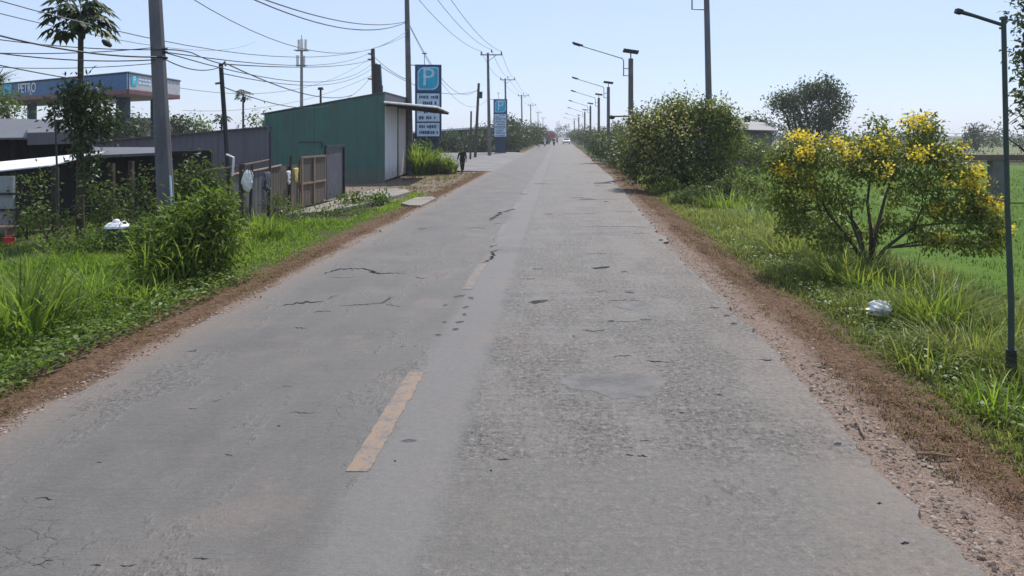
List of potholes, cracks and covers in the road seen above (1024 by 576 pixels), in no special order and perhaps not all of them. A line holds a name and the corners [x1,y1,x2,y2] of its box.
crack [325,268,424,279]
crack [474,209,514,263]
crack [283,295,399,329]
